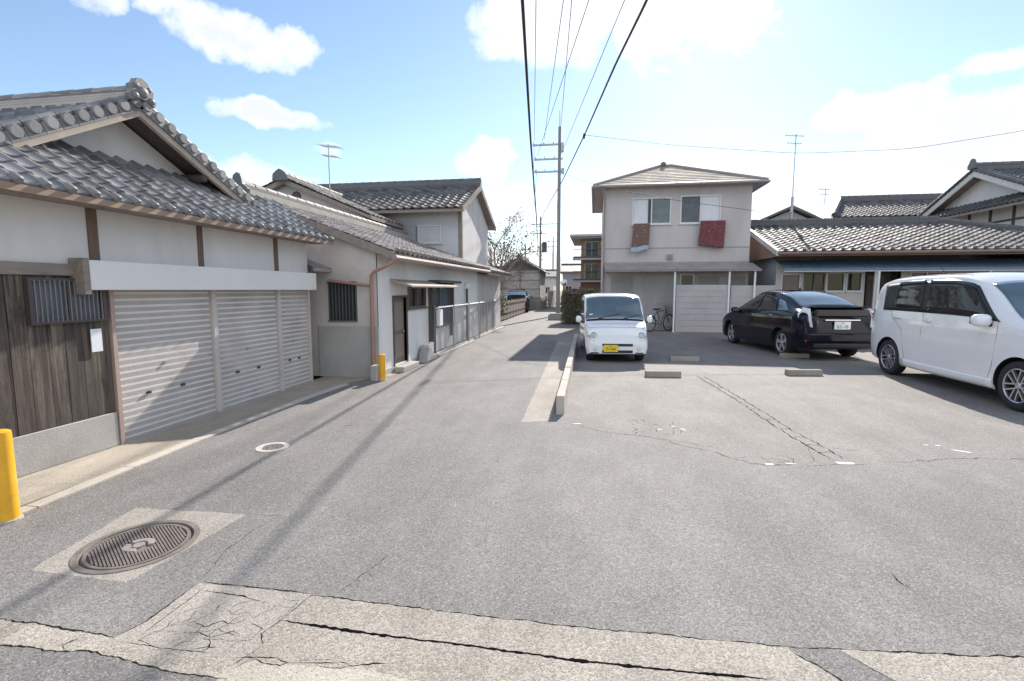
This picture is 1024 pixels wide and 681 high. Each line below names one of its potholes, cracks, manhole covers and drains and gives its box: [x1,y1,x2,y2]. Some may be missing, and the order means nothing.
crack [0,514,396,679]
manhole cover [255,442,289,452]
manhole cover [69,520,200,574]
crack [697,376,849,461]
